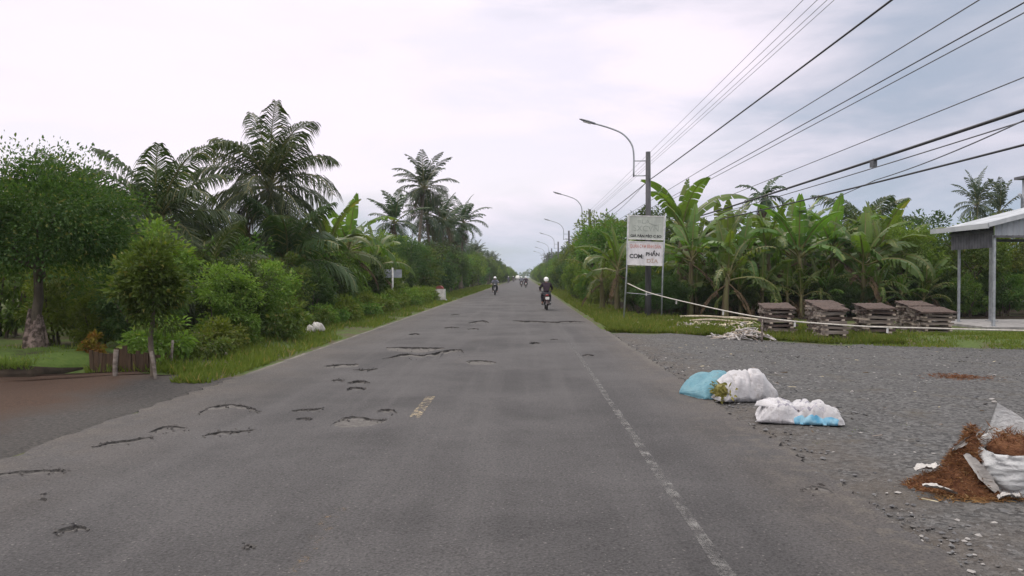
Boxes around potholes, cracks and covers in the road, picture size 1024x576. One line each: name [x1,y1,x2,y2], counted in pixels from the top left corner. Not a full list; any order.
pothole [386,346,446,354]
pothole [376,408,397,417]
pothole [202,427,256,439]
pothole [329,414,387,430]
pothole [52,522,93,539]
pothole [148,424,190,436]
pothole [198,402,262,418]
pothole [91,435,155,450]
pothole [0,466,71,483]
pothole [383,349,464,362]
